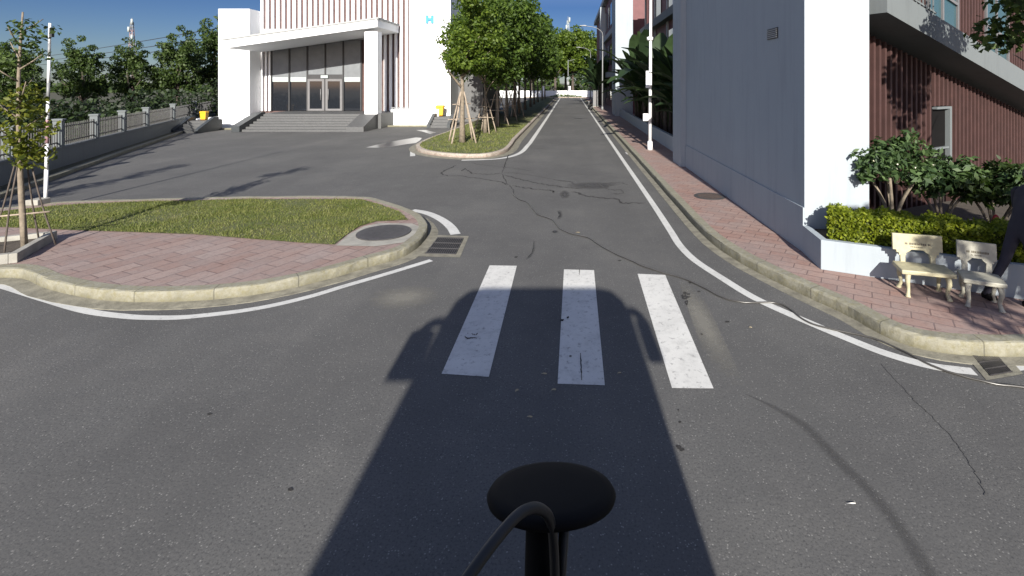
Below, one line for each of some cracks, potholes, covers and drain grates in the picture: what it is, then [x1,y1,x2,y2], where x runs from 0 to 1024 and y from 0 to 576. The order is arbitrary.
drain grate [419,235,469,257]
crack [881,364,986,495]
manhole cover [356,224,411,241]
drain grate [973,355,1023,380]
crack [440,155,640,204]
